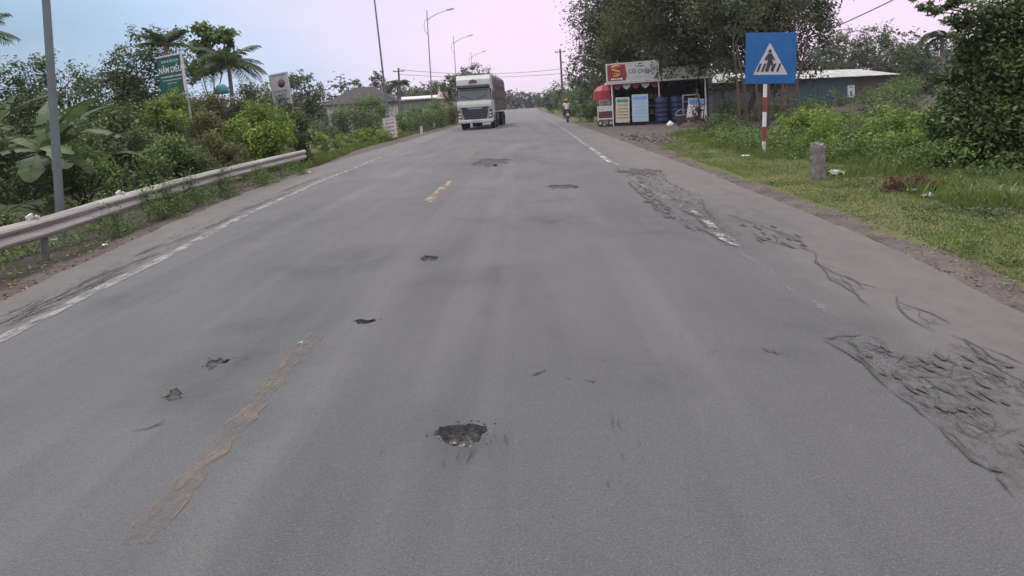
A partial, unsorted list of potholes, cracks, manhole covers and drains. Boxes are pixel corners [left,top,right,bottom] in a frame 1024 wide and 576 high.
pothole [471,158,512,167]
pothole [164,388,182,401]
pothole [205,357,230,371]
pothole [434,423,488,447]
crack [616,168,1024,495]
